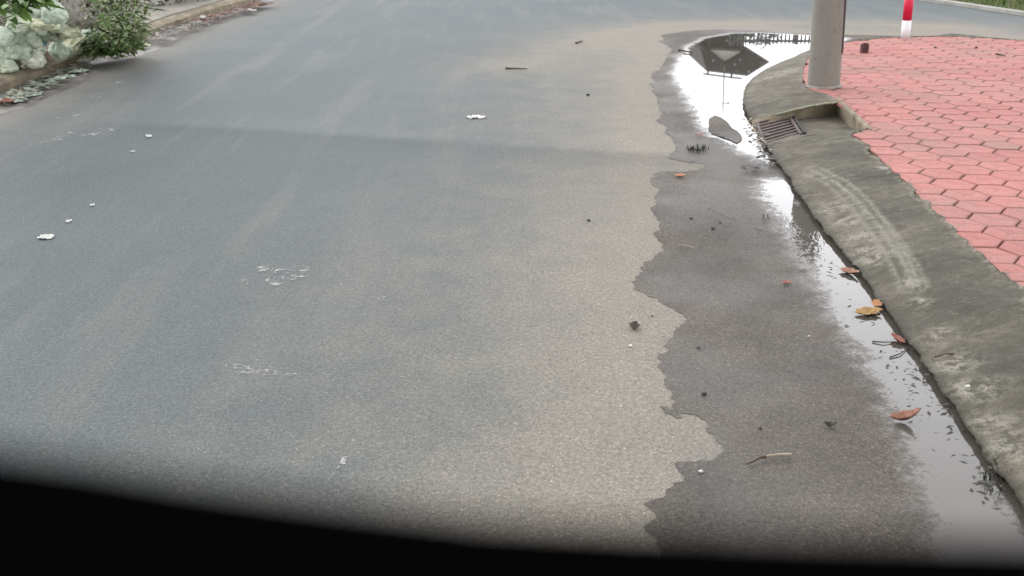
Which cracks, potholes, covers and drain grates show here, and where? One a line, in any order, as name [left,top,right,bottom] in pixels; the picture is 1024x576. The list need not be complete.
drain grate [755,116,806,149]
